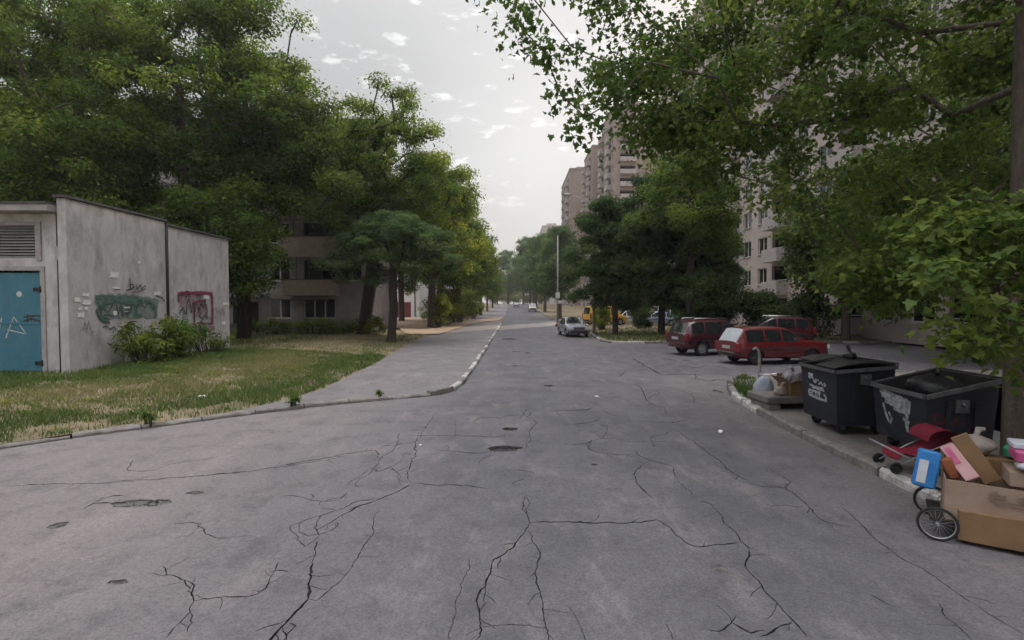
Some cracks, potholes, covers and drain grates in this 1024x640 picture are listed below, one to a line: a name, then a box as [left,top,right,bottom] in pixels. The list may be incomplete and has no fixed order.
crack [152,410,537,640]
pothole [108,499,159,507]
crack [448,359,1024,640]
